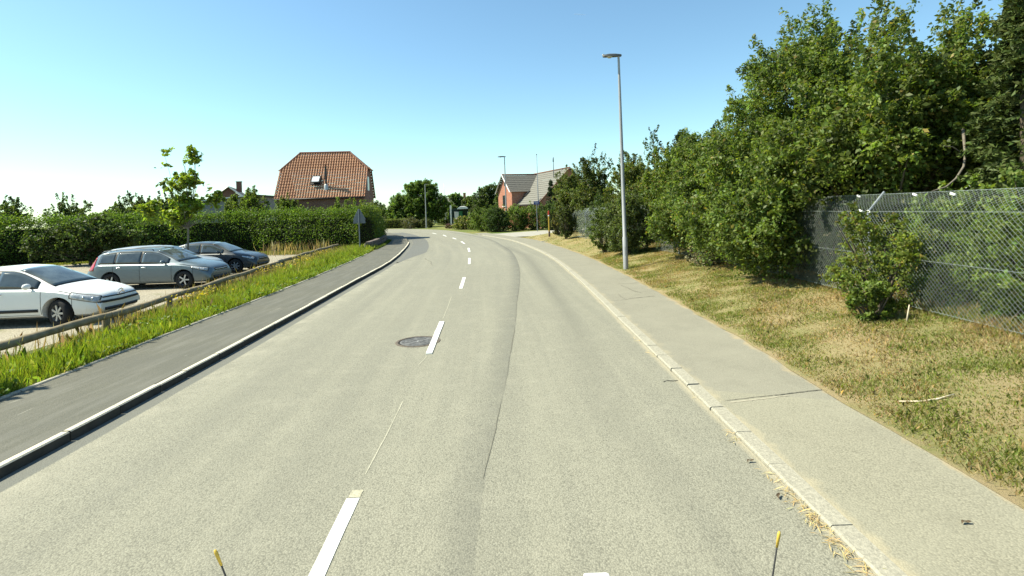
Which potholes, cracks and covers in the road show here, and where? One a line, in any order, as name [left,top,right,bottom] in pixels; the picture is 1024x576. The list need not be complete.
manhole cover [395,336,441,347]
